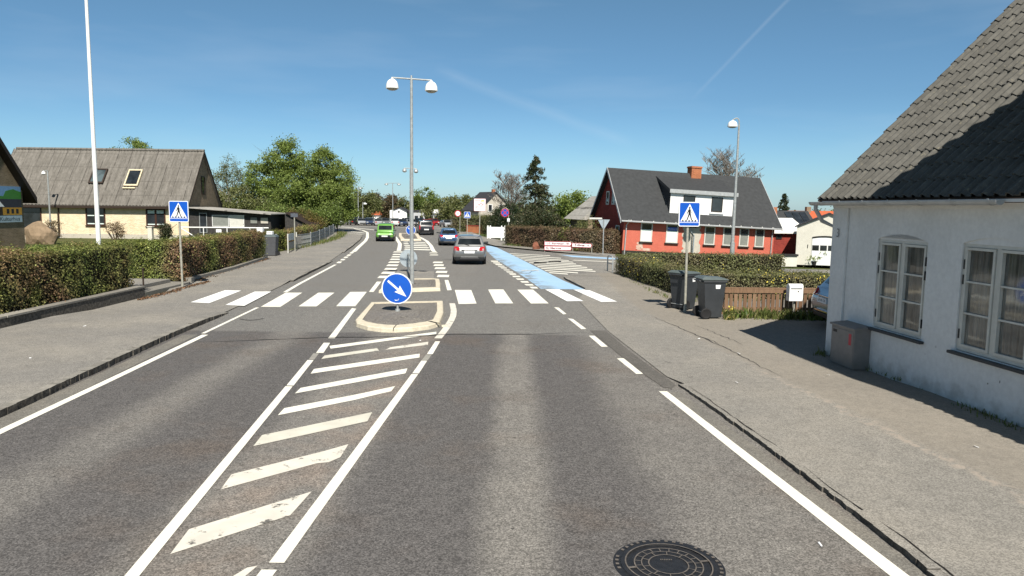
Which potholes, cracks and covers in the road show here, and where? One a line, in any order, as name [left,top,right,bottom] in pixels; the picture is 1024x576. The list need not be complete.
crack [669,323,766,369]
manhole cover [613,540,726,576]
crack [805,467,954,576]
